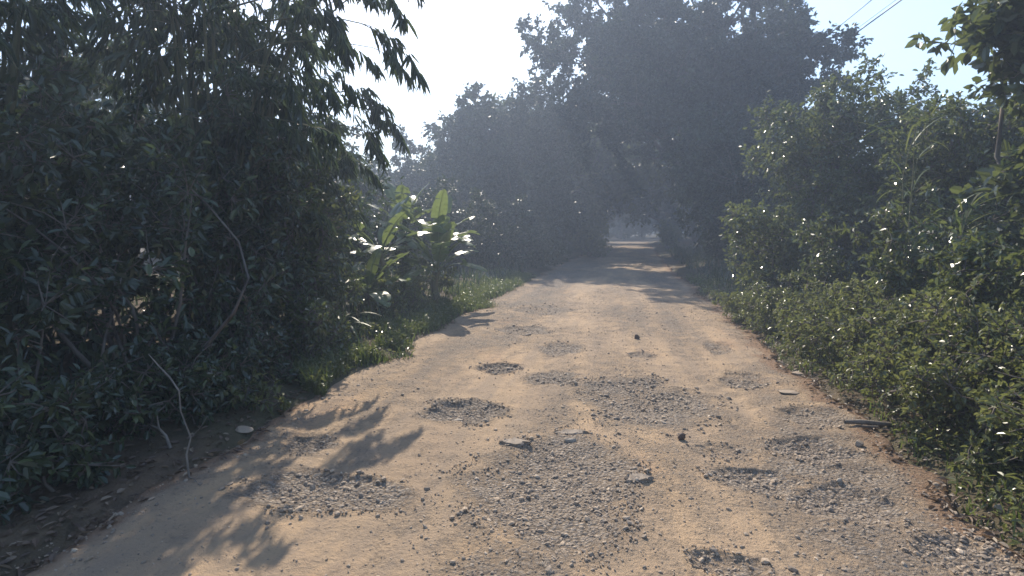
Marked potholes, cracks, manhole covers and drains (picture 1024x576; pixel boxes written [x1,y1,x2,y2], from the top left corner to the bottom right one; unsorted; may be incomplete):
pothole [702,340,734,356]
pothole [415,397,510,426]
pothole [521,370,580,386]
pothole [537,340,586,357]
pothole [469,361,524,375]
pothole [438,425,652,574]
pothole [562,373,738,436]
pothole [229,465,436,519]
pothole [678,544,776,576]
pothole [715,369,780,390]
